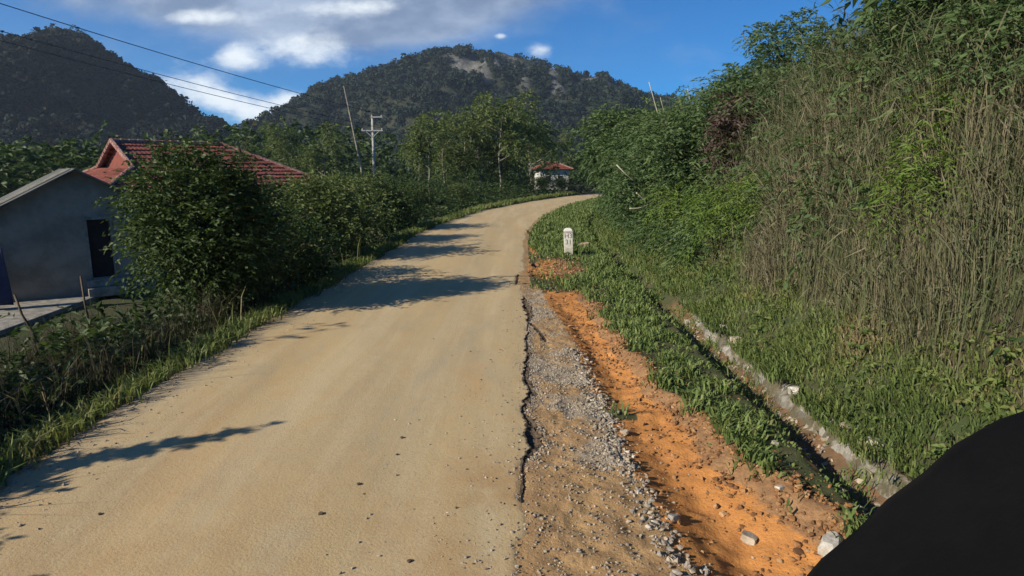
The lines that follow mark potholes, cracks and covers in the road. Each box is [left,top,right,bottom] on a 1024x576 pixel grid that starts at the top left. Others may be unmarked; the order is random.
crack [492,274,546,503]
